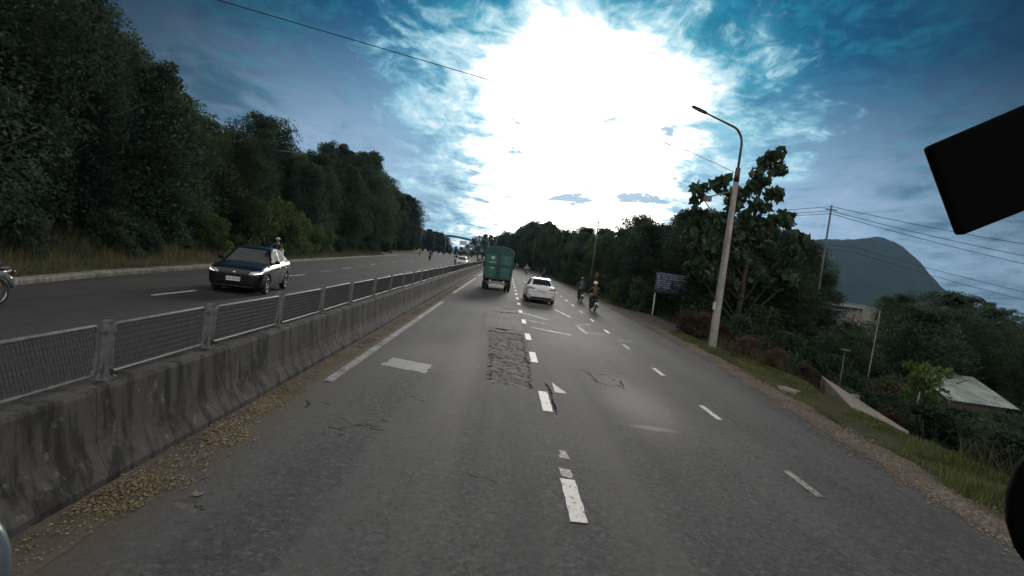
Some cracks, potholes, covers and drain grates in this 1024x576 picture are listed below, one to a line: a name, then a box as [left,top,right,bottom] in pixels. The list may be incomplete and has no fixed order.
crack [305,396,424,435]
crack [582,370,625,389]
